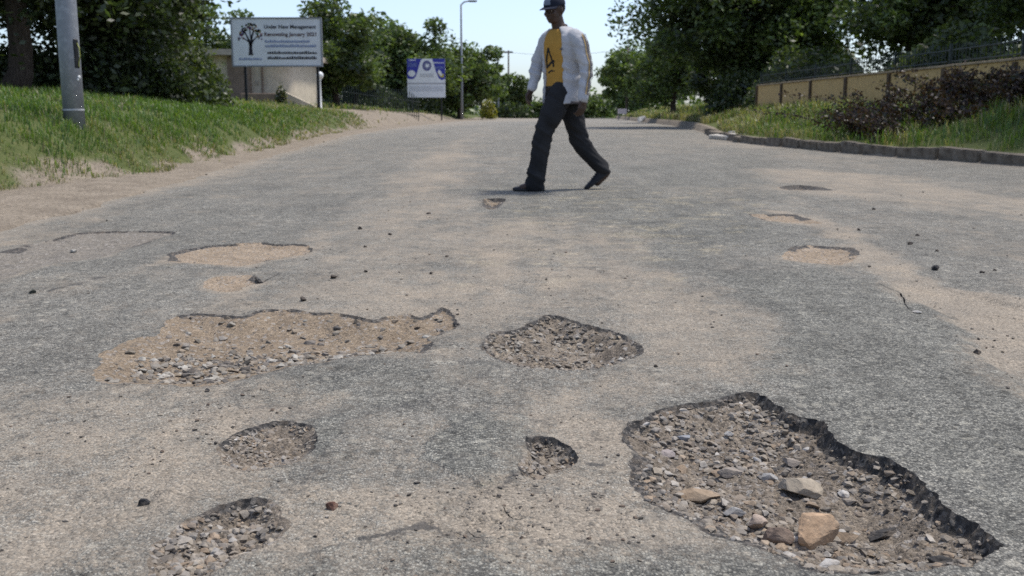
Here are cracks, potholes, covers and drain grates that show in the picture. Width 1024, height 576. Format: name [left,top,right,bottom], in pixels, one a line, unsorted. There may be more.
pothole [480,315,644,371]
pothole [91,307,460,387]
pothole [619,392,1004,576]
pothole [216,421,318,471]
pothole [482,198,506,209]
pothole [147,497,292,576]
pothole [518,436,579,480]
